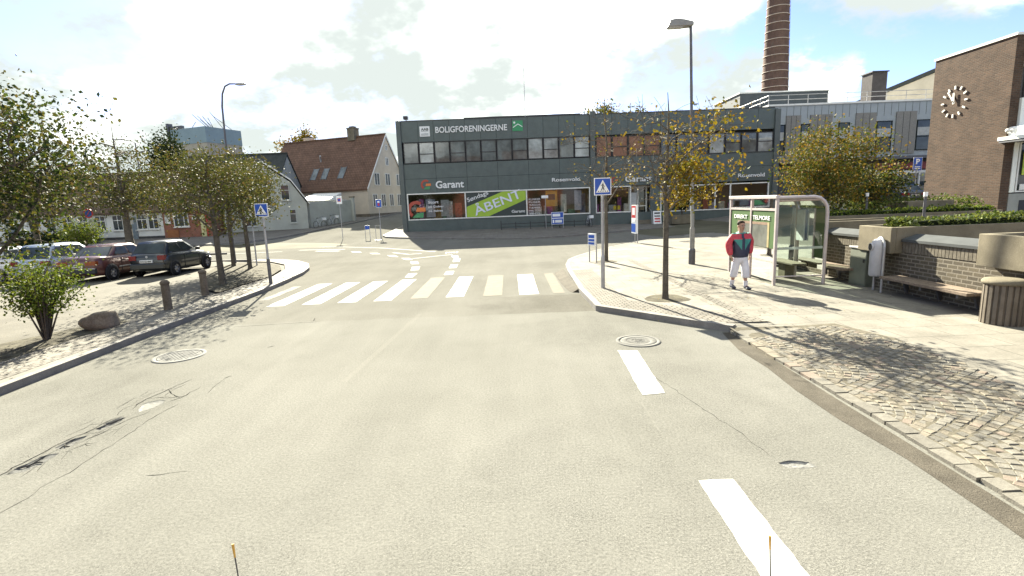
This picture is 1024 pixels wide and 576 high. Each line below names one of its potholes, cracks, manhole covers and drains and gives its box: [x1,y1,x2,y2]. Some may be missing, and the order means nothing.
crack [0,376,229,511]
crack [655,377,771,457]
pothole [6,453,58,475]
pothole [56,435,88,451]
manhole cover [151,349,207,364]
pothole [779,460,817,469]
manhole cover [616,335,661,347]
